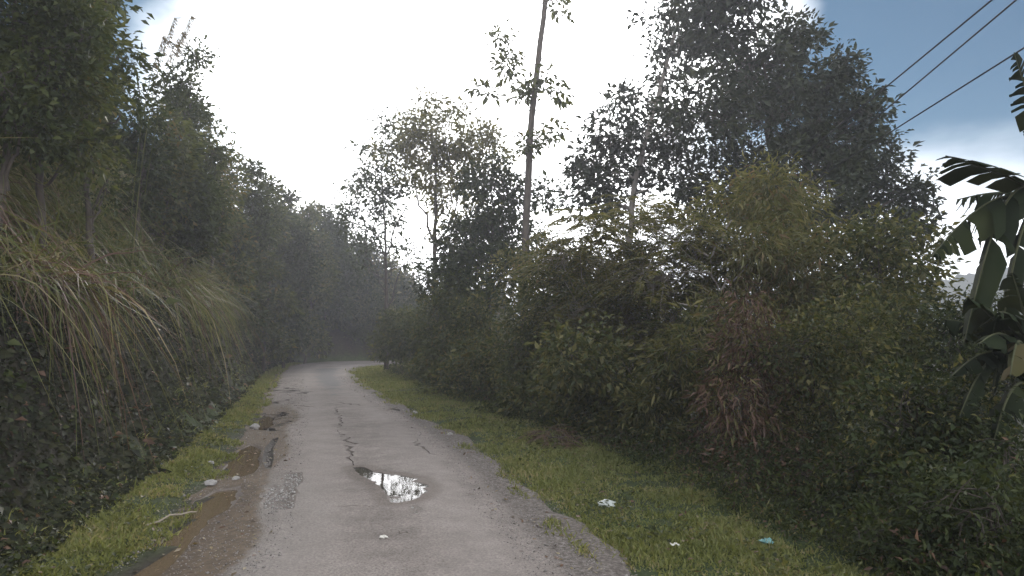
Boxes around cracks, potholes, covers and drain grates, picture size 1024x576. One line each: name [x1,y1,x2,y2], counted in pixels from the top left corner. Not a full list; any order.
pothole [252,414,276,430]
pothole [352,466,429,502]
pothole [262,437,279,469]
crack [333,402,366,465]
